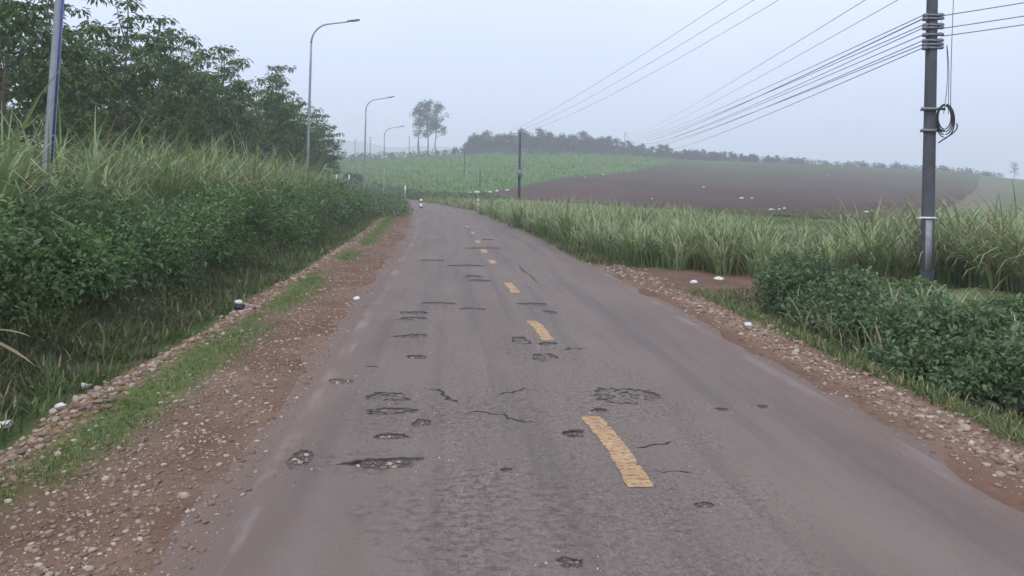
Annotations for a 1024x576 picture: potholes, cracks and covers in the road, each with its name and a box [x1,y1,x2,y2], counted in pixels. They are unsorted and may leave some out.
pothole [336,457,425,470]
pothole [410,419,431,427]
pothole [561,429,585,438]
pothole [556,556,584,569]
crack [366,388,541,424]
